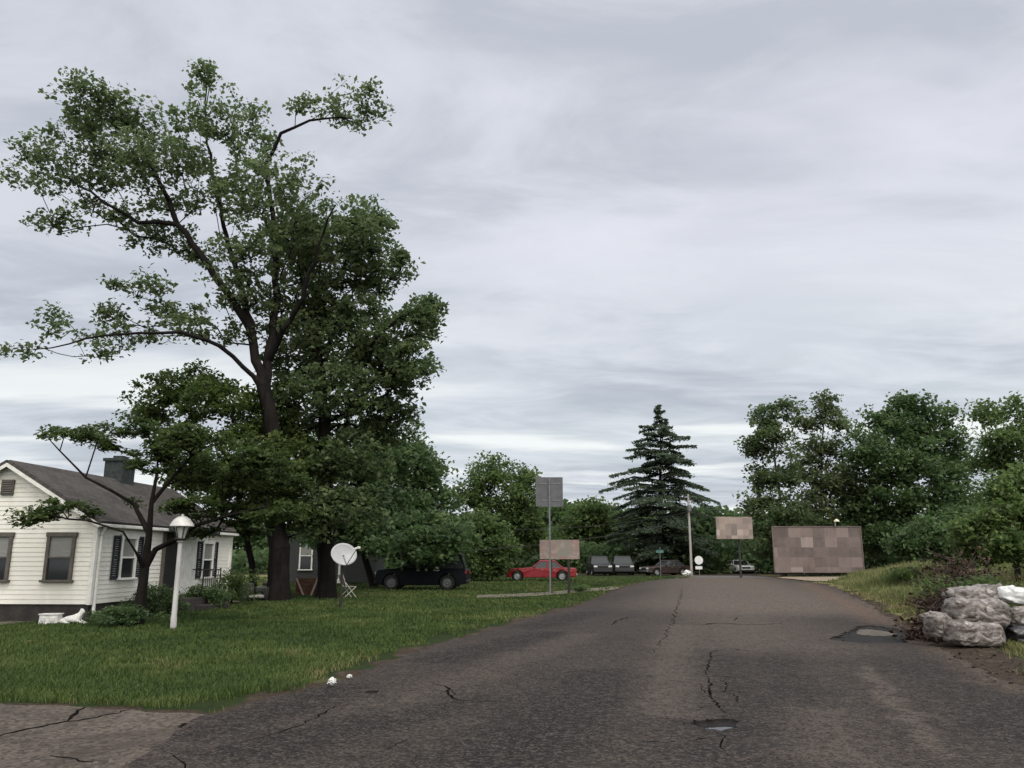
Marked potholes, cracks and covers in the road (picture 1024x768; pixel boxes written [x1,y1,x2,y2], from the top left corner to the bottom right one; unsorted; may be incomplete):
crack [0,707,130,736]
pothole [690,718,739,730]
pothole [825,625,919,643]
crack [639,648,763,754]
crack [253,702,355,740]
crack [395,680,514,704]
